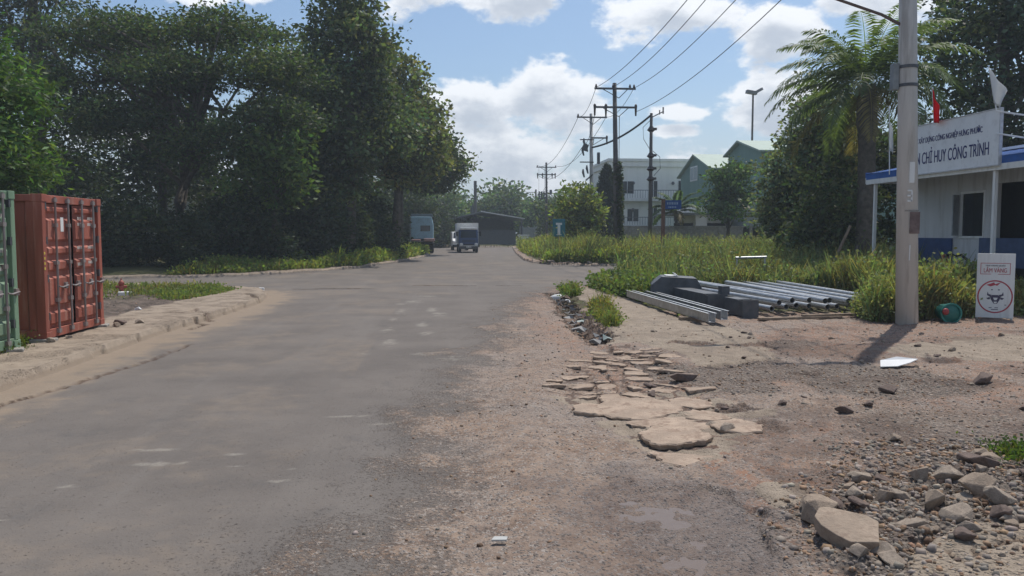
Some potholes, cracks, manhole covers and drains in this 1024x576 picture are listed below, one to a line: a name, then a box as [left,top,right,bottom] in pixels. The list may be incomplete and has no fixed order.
crack [546,344,737,451]
